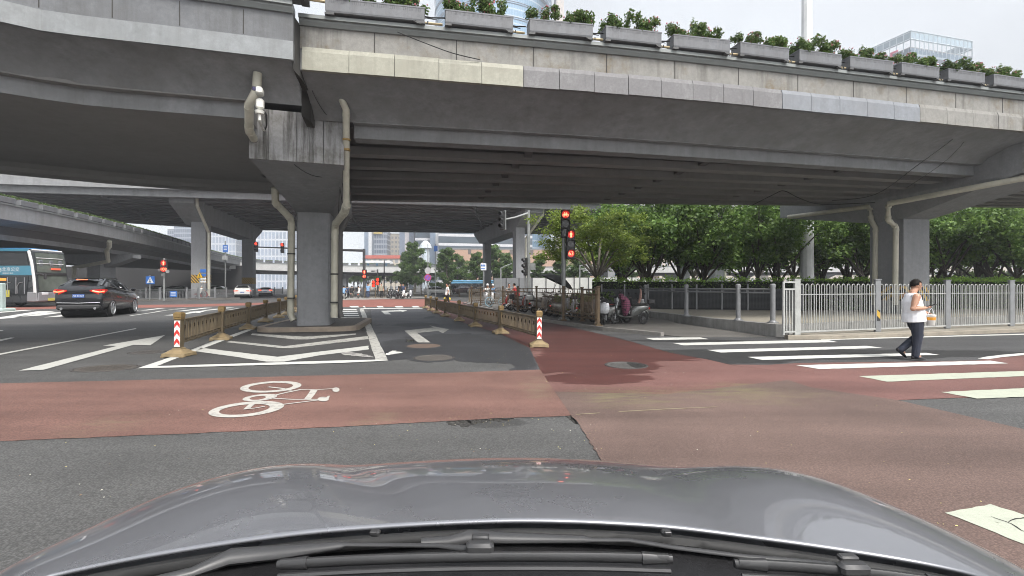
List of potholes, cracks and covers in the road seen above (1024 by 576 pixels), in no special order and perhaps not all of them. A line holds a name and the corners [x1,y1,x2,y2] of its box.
pothole [446,418,514,427]
manhole cover [69,364,141,373]
manhole cover [604,361,648,369]
